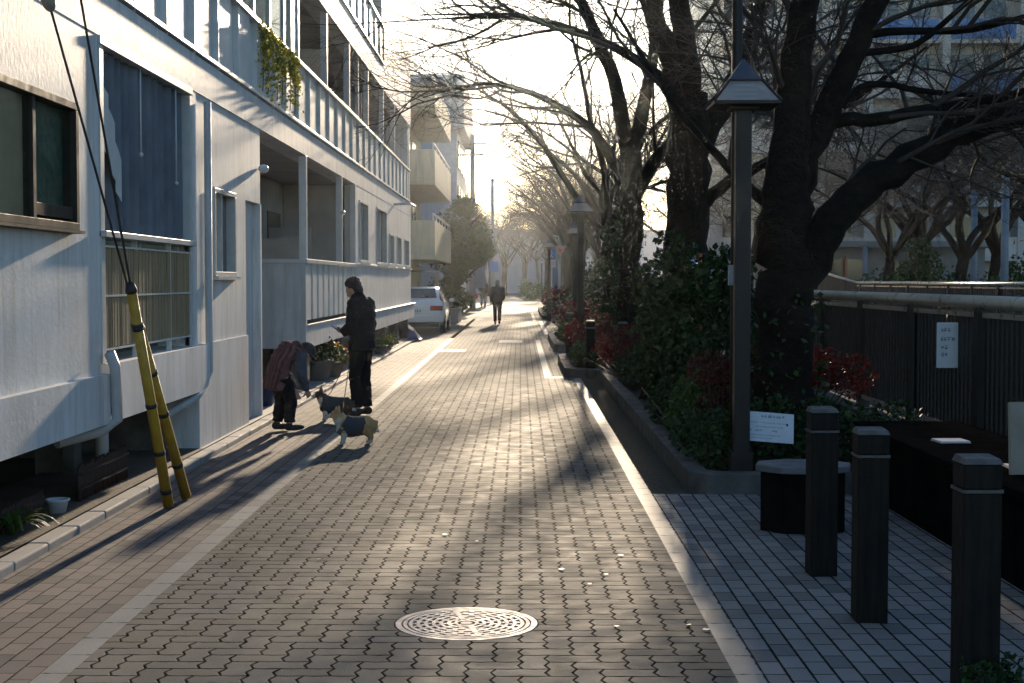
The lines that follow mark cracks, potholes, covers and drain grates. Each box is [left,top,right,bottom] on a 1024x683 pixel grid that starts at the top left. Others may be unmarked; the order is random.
manhole cover [395,607,537,641]
